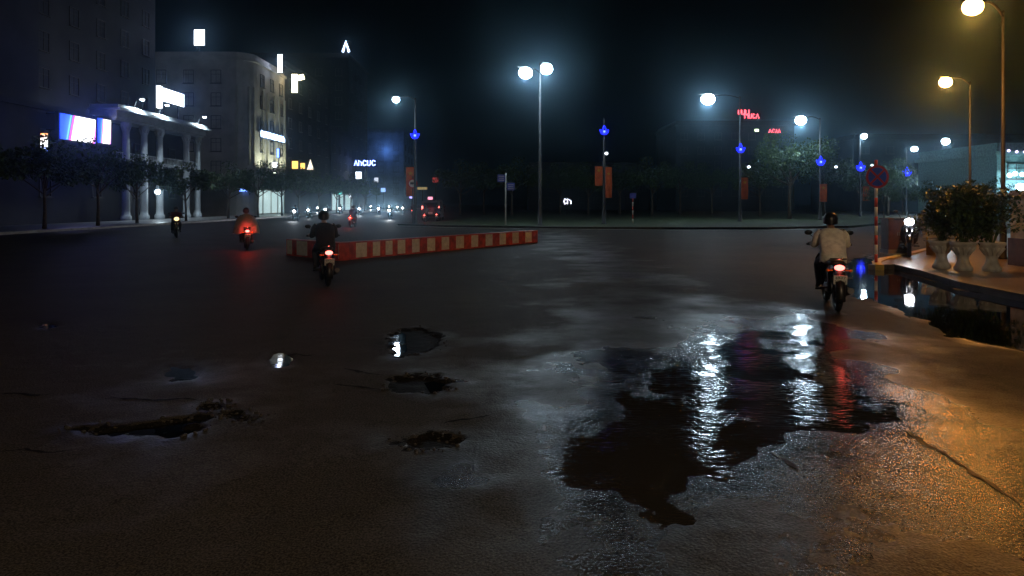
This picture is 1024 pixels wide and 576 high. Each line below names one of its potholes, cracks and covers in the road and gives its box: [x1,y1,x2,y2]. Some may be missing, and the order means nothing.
crack [890,421,1024,506]
crack [445,415,488,423]
pothole [387,429,467,455]
pothole [372,371,458,395]
pothole [382,325,447,358]
pothole [57,411,214,439]
